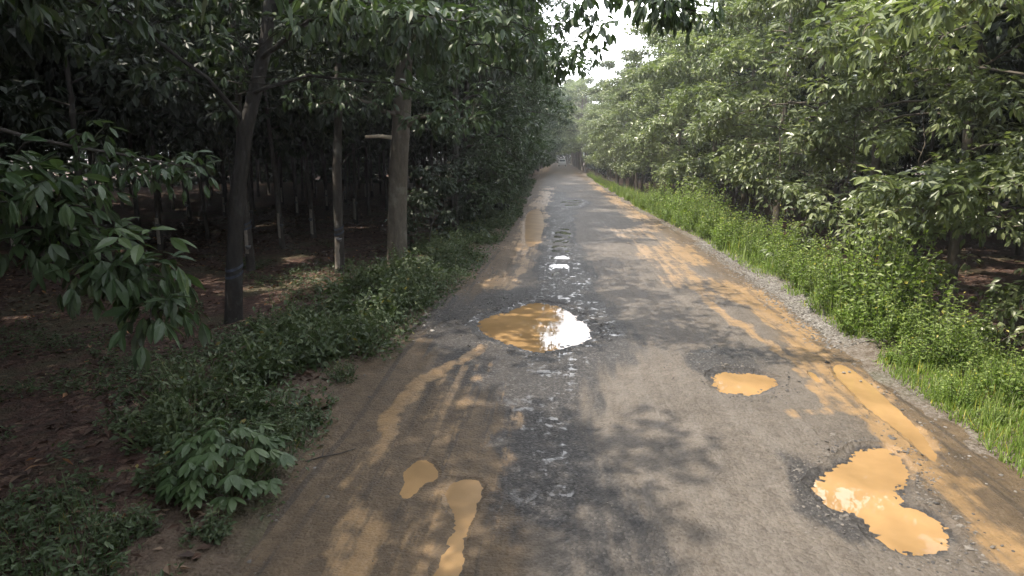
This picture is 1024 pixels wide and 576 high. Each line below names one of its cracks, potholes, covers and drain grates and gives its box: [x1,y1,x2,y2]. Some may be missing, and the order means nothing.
pothole [829,363,946,464]
pothole [800,441,962,560]
pothole [703,367,788,397]
pothole [428,476,488,576]
pothole [544,228,575,280]
pothole [520,209,548,247]
pothole [395,457,442,500]
pothole [465,299,603,355]
